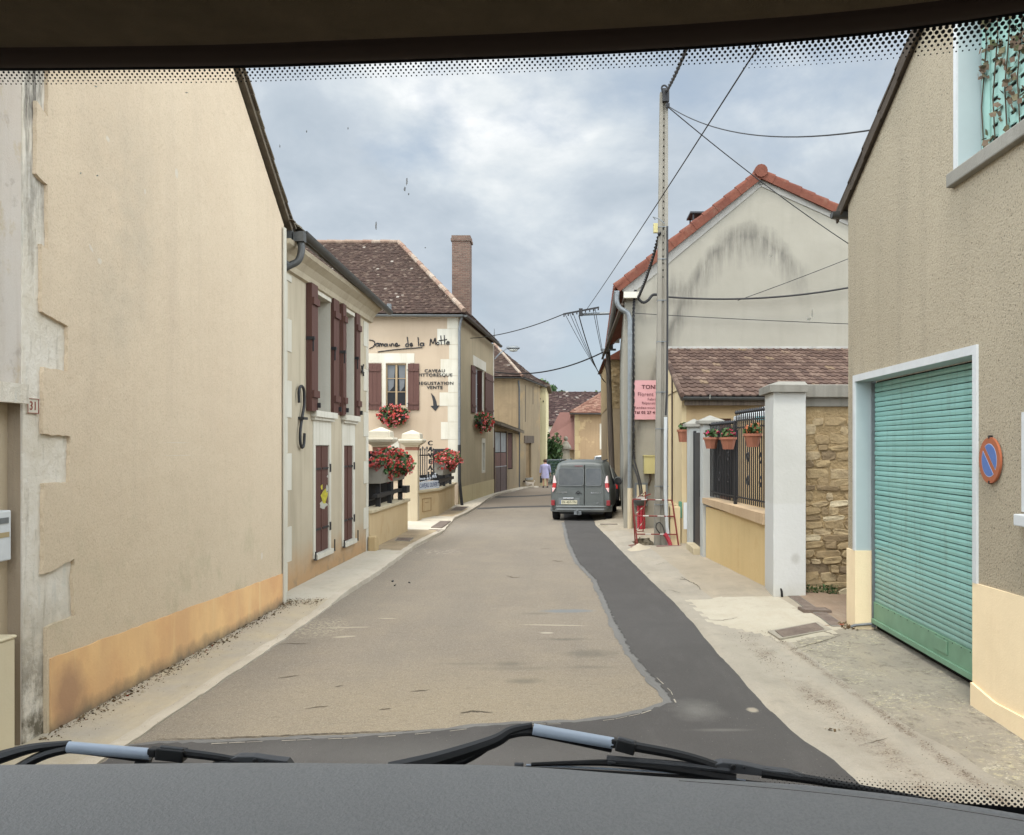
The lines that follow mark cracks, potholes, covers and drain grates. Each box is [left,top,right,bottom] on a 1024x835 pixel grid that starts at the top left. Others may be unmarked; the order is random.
manhole cover [768,621,832,641]
